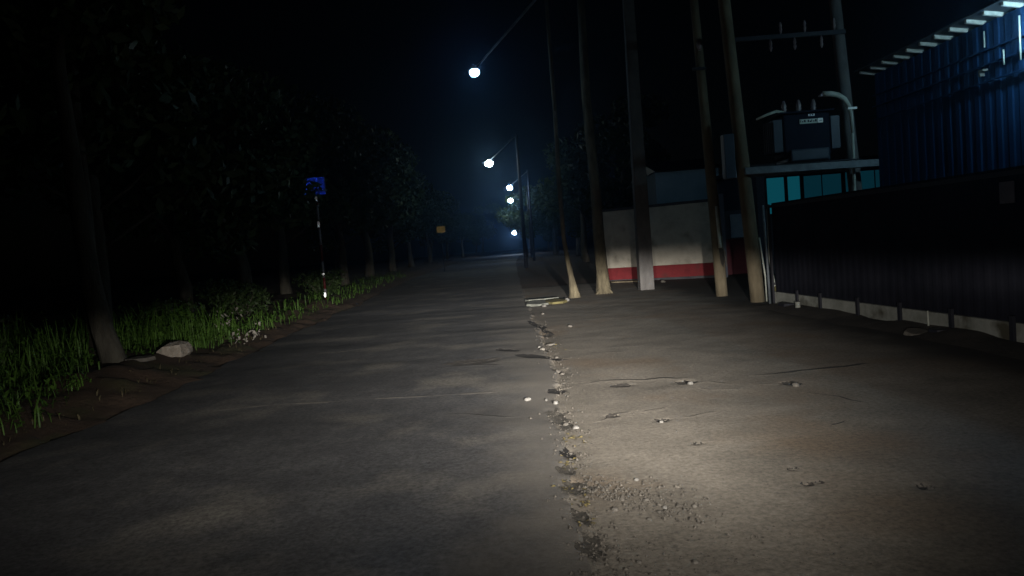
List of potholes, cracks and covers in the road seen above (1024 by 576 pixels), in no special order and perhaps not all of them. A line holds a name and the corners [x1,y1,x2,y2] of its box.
crack [594,407,720,422]
crack [563,363,871,404]
